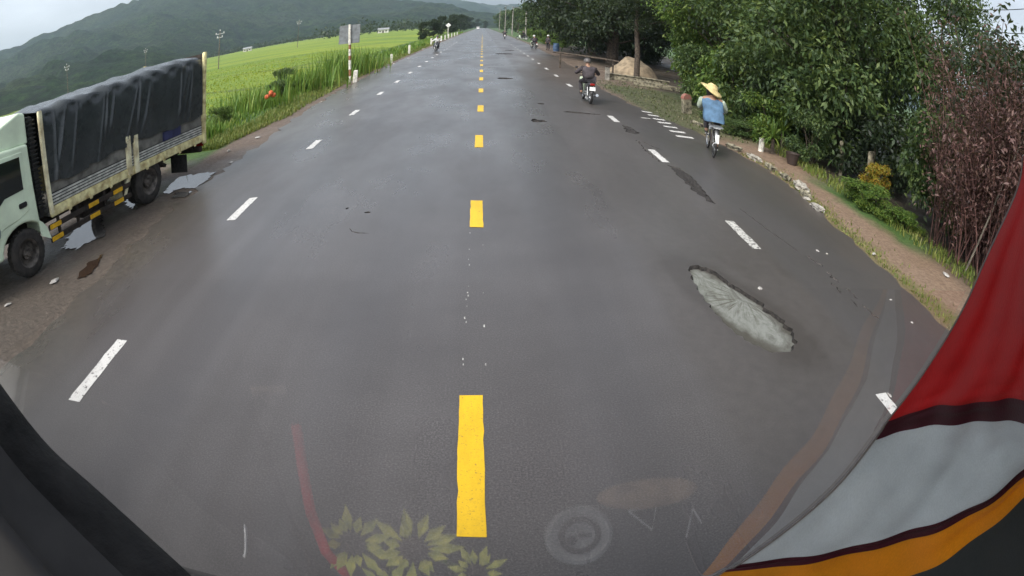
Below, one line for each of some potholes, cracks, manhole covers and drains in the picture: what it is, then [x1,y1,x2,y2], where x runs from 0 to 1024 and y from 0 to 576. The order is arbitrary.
crack [742,210,879,319]
pothole [688,265,798,353]
